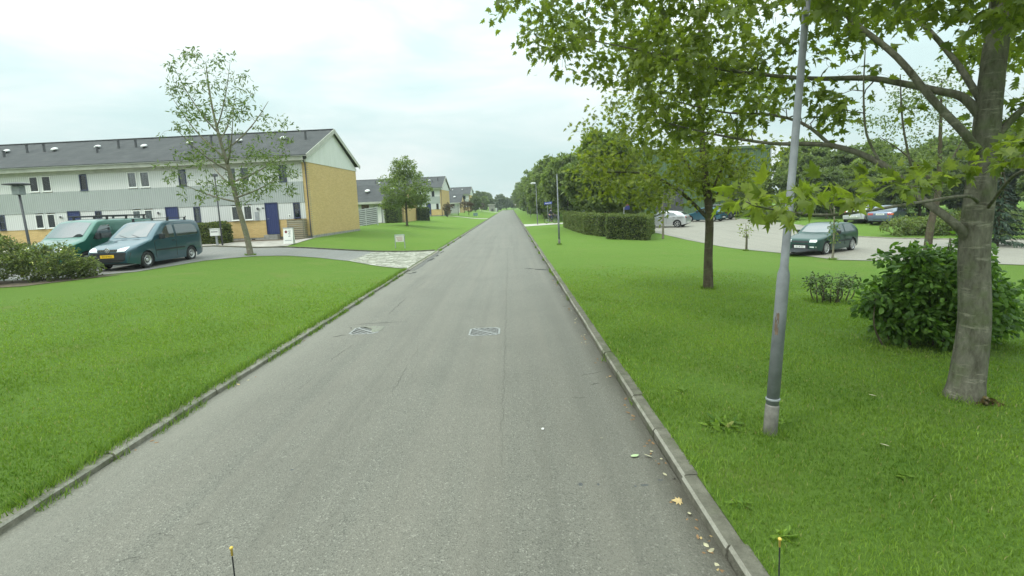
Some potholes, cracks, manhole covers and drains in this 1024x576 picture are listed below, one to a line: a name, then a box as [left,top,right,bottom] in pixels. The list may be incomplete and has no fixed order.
drain grate [349,326,384,335]
crack [304,251,444,385]
drain grate [468,327,500,336]
